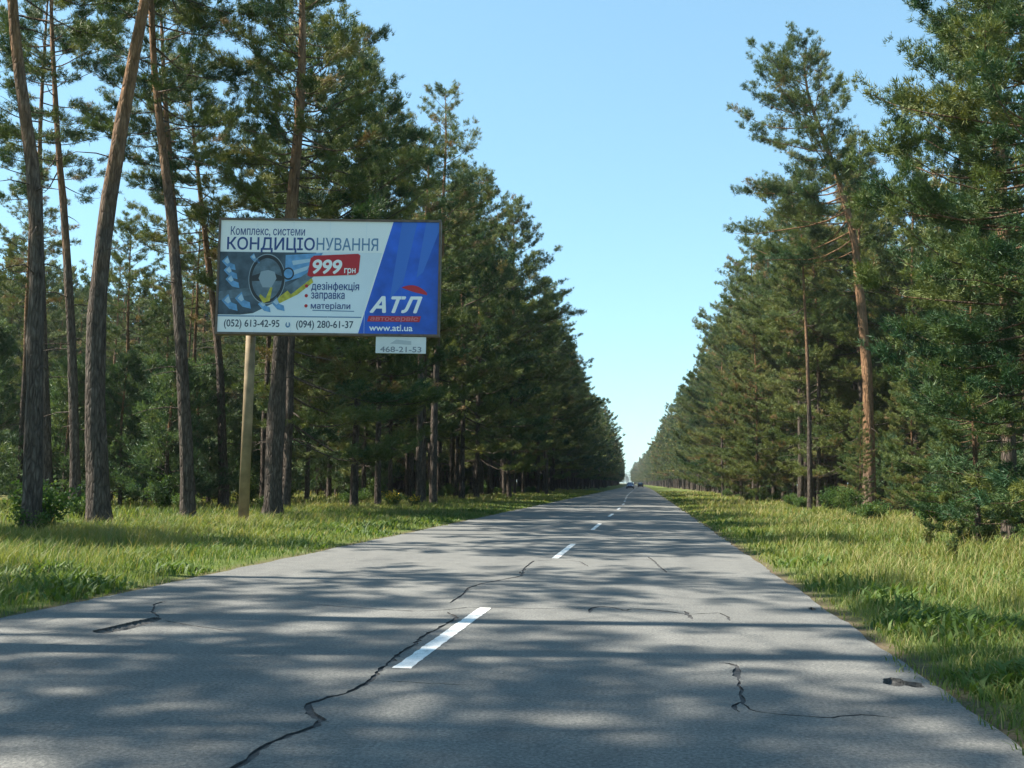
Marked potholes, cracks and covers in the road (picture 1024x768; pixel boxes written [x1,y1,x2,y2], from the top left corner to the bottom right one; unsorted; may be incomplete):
crack [725,663,894,718]
crack [151,560,730,768]
